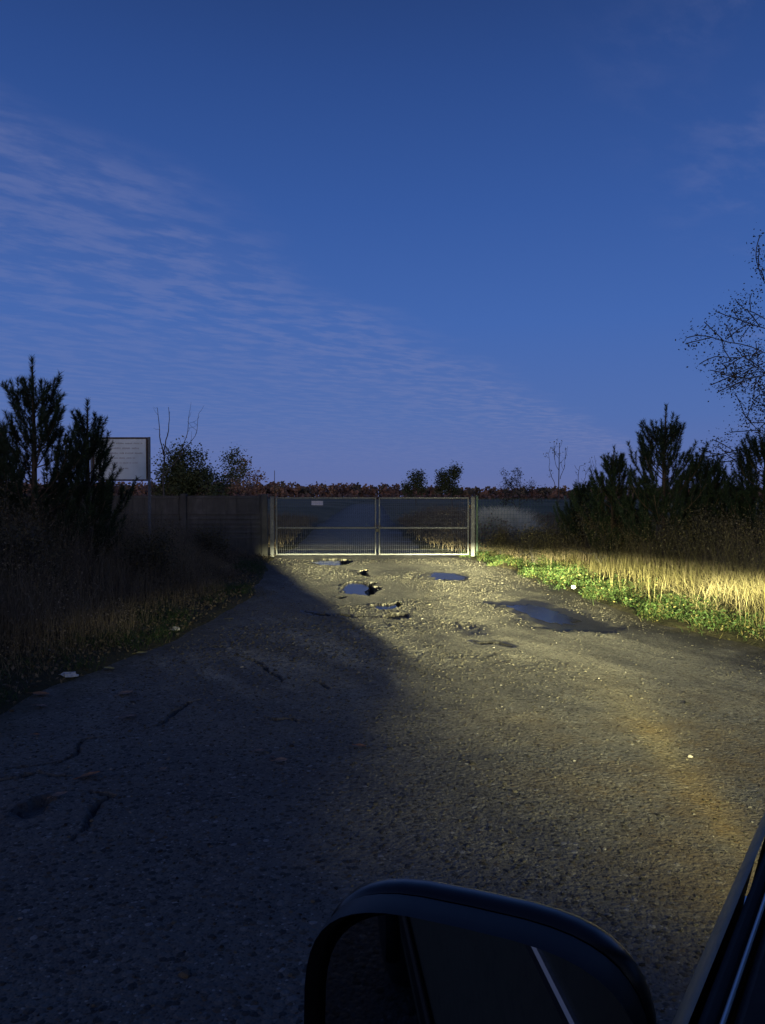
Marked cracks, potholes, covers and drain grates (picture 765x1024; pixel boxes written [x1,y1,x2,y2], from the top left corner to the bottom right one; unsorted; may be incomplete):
pothole [8,793,58,820]
crack [0,735,117,842]
pothole [340,581,383,597]
crack [152,698,204,726]
pothole [381,612,411,620]
pothole [307,558,353,566]
pothole [458,623,487,635]
